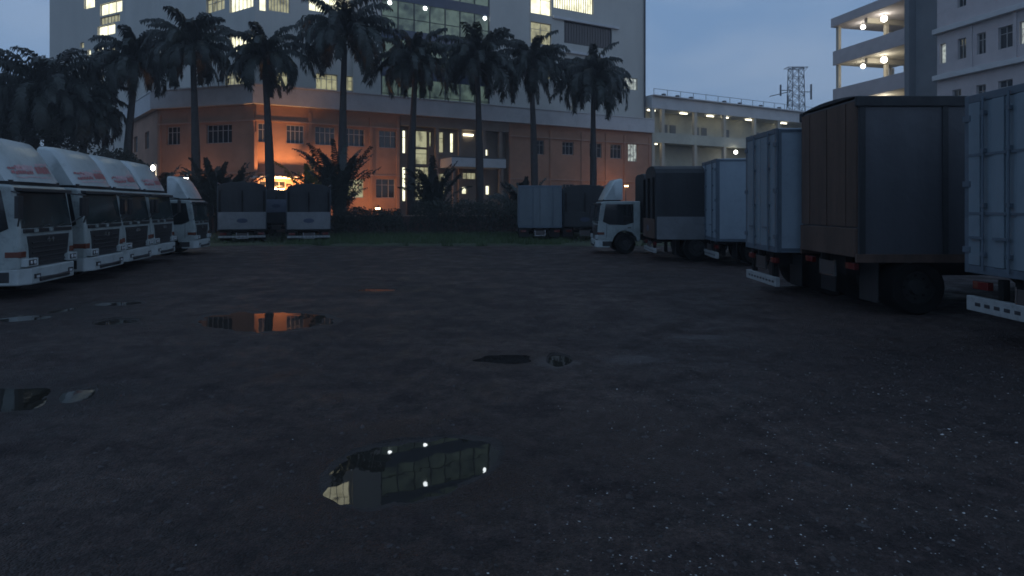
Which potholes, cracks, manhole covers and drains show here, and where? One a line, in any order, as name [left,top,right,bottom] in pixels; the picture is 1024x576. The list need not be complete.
pothole [546,352,574,367]
pothole [472,355,531,364]
pothole [56,387,98,403]
pothole [92,317,140,325]
pothole [193,311,343,334]
pothole [318,434,506,512]
pothole [0,388,51,413]
